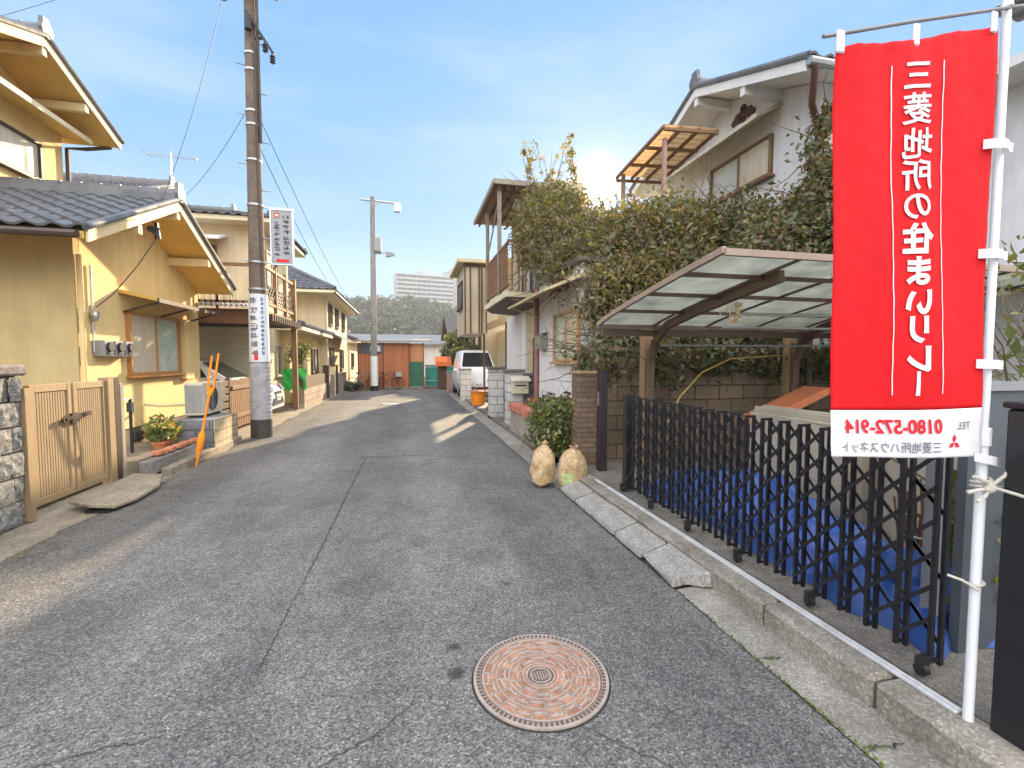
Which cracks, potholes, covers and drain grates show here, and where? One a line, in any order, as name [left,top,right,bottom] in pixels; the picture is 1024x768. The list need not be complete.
manhole cover [472,634,611,733]
crack [34,735,163,768]
crack [318,699,415,768]
